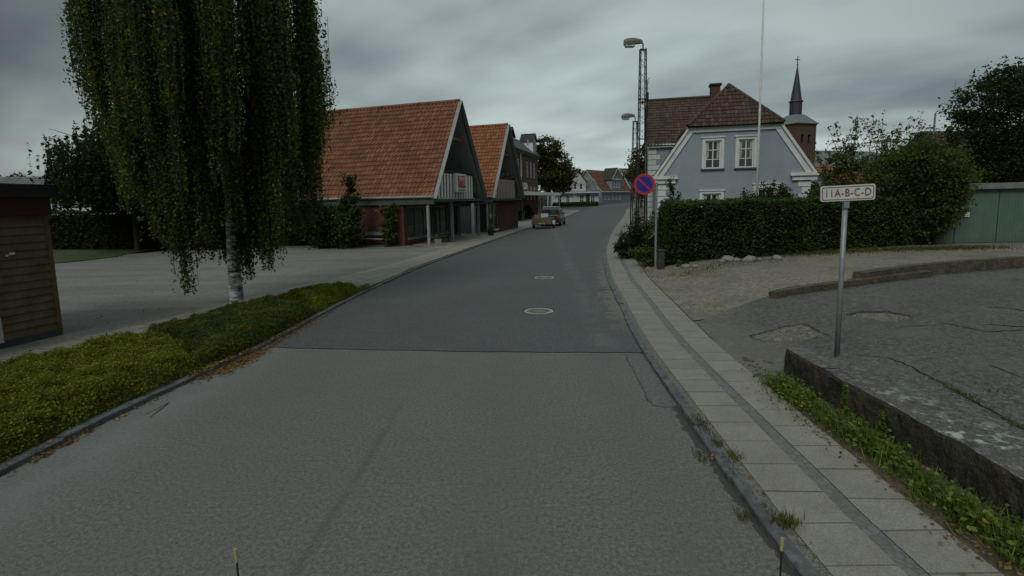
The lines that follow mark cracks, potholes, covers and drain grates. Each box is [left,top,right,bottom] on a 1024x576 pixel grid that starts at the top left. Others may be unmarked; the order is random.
pothole [846,310,912,321]
crack [626,355,652,403]
pothole [749,323,829,343]
crack [867,355,1023,429]
crack [898,307,1024,332]
